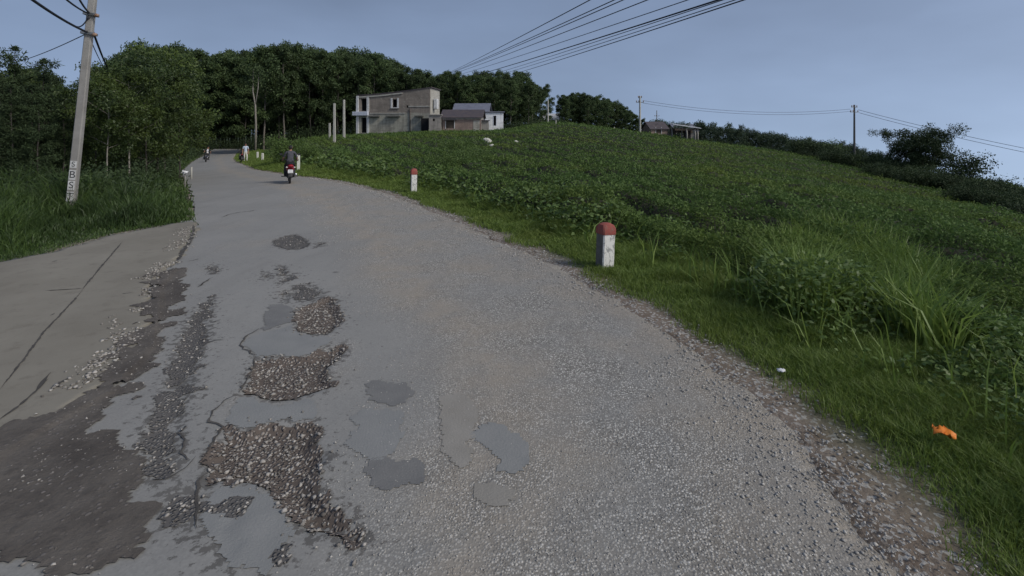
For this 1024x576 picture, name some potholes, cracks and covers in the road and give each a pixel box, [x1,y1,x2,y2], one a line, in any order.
crack [163,328,259,527]
pothole [272,235,310,249]
pothole [169,410,371,566]
pothole [237,344,356,401]
pothole [132,294,216,479]
pothole [287,296,350,335]
crack [0,243,132,419]
